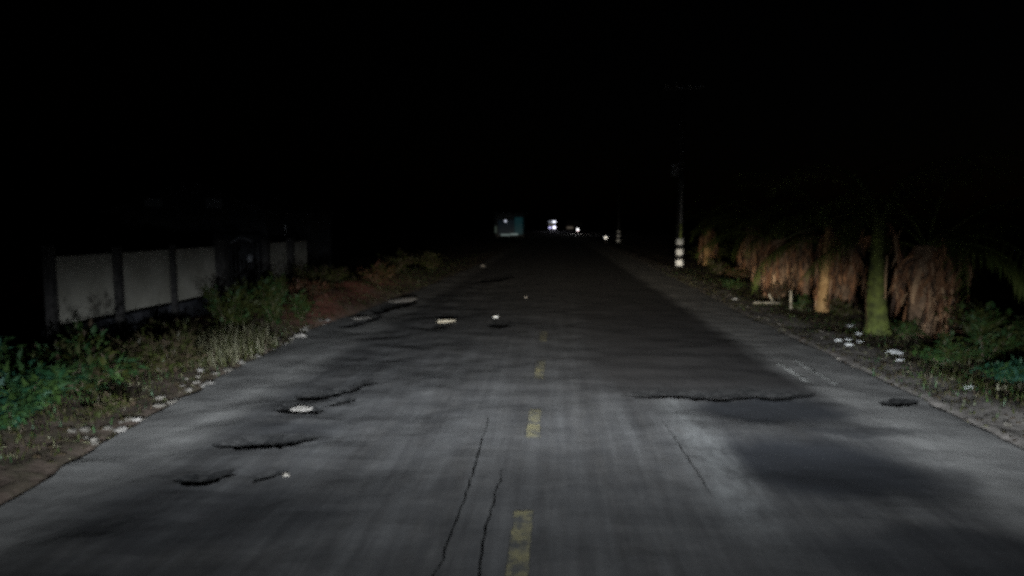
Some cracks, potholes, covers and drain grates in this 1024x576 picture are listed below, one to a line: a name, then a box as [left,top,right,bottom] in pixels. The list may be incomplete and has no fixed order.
pothole [272,402,325,415]
pothole [171,468,239,487]
pothole [878,398,920,408]
pothole [339,314,384,328]
crack [431,417,502,576]
pothole [212,433,320,451]
pothole [251,470,284,483]
crack [662,420,716,498]
pothole [486,318,515,329]
pothole [294,378,377,400]
